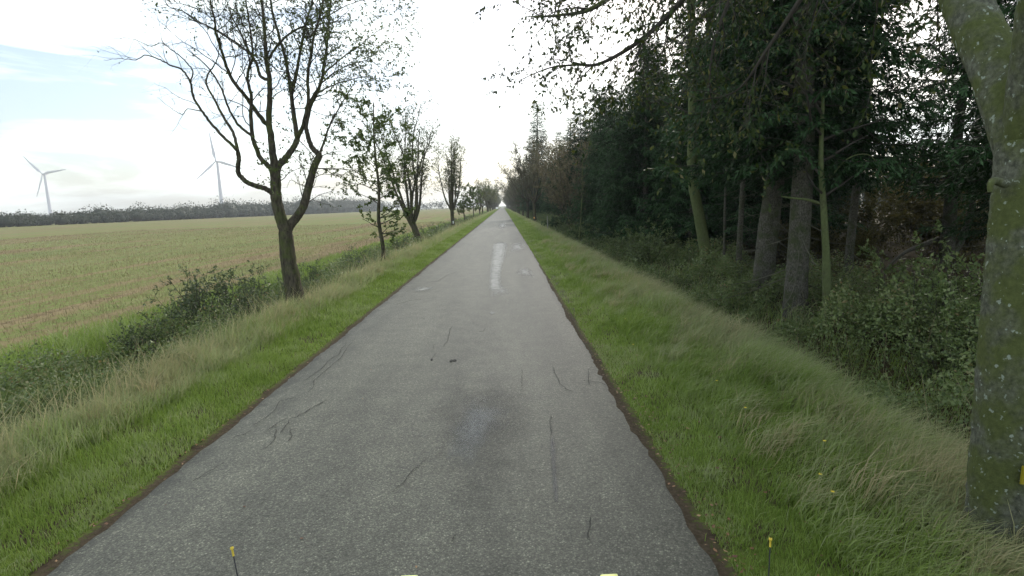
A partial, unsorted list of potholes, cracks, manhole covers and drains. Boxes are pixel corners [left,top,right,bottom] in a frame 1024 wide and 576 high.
crack [233,344,347,448]
